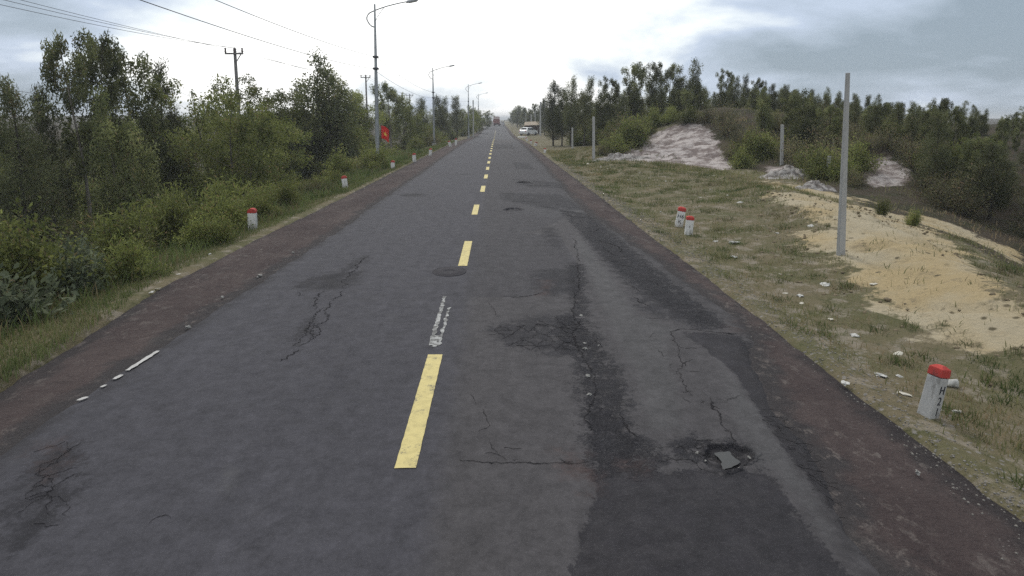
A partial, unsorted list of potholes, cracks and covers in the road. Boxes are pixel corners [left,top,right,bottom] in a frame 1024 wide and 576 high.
crack [490,305,586,350]
crack [281,256,368,360]
crack [661,329,737,402]
crack [19,441,80,527]
pothole [698,441,762,474]
crack [666,395,741,470]
manhole cover [432,267,467,277]
crack [461,397,583,464]
